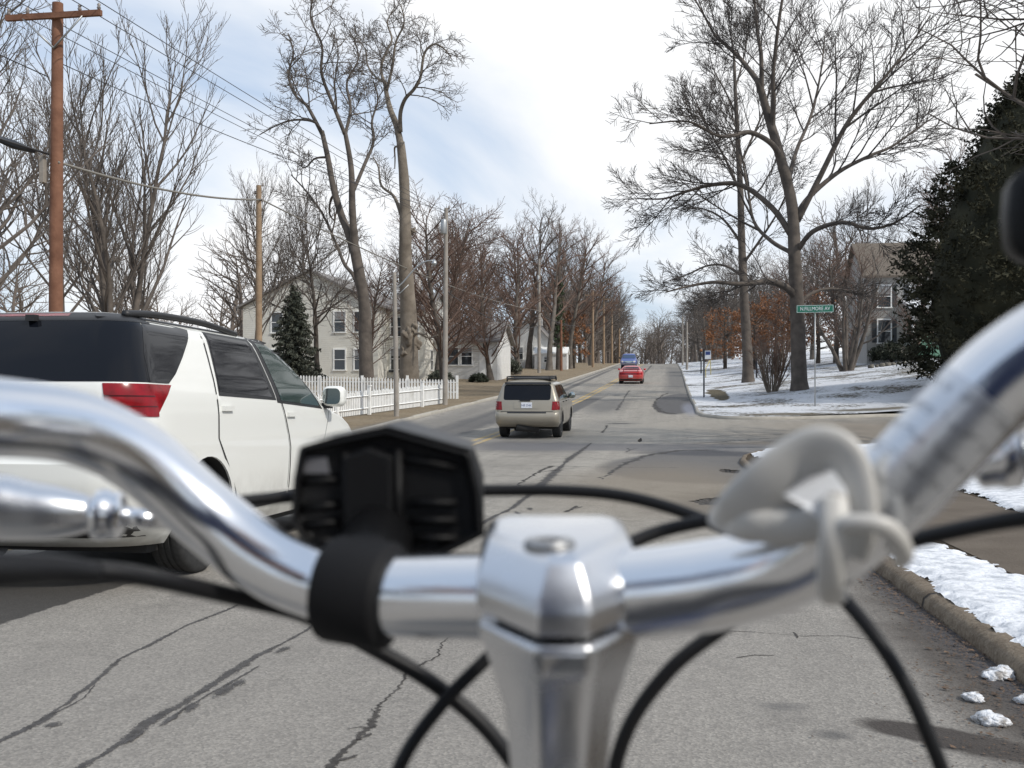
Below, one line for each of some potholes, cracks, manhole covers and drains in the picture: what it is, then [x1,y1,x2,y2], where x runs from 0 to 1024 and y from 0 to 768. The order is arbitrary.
crack [325,640,446,768]
crack [505,448,674,484]
